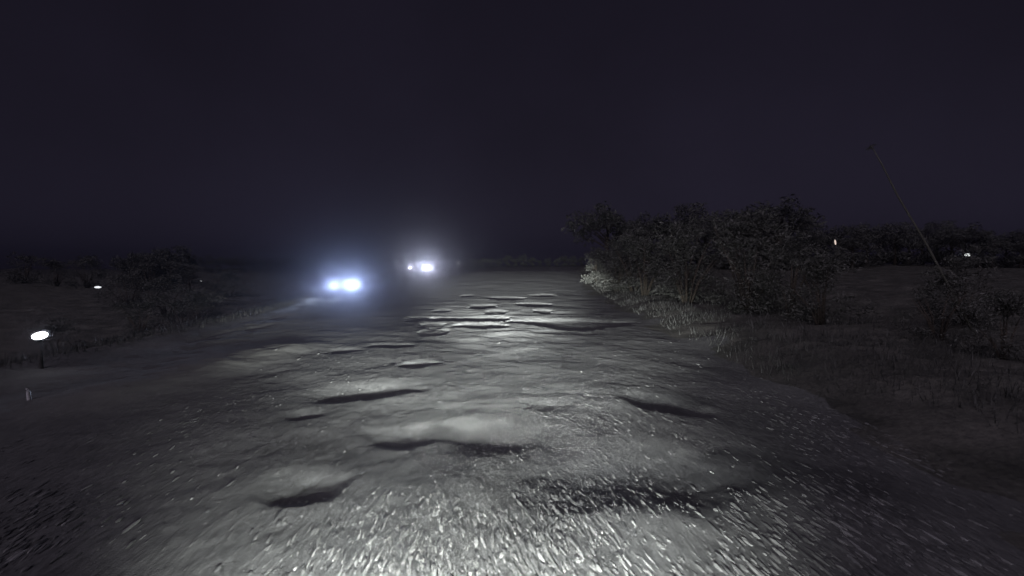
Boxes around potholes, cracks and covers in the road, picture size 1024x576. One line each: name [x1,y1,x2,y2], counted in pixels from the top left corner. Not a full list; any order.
pothole [267,377,439,406]
pothole [241,453,369,511]
pothole [417,321,447,331]
pothole [395,358,446,369]
pothole [415,314,520,323]
pothole [427,416,596,471]
pothole [502,317,646,331]
pothole [273,406,334,423]
pothole [607,388,743,423]
pothole [448,321,512,329]
pothole [462,432,792,522]
